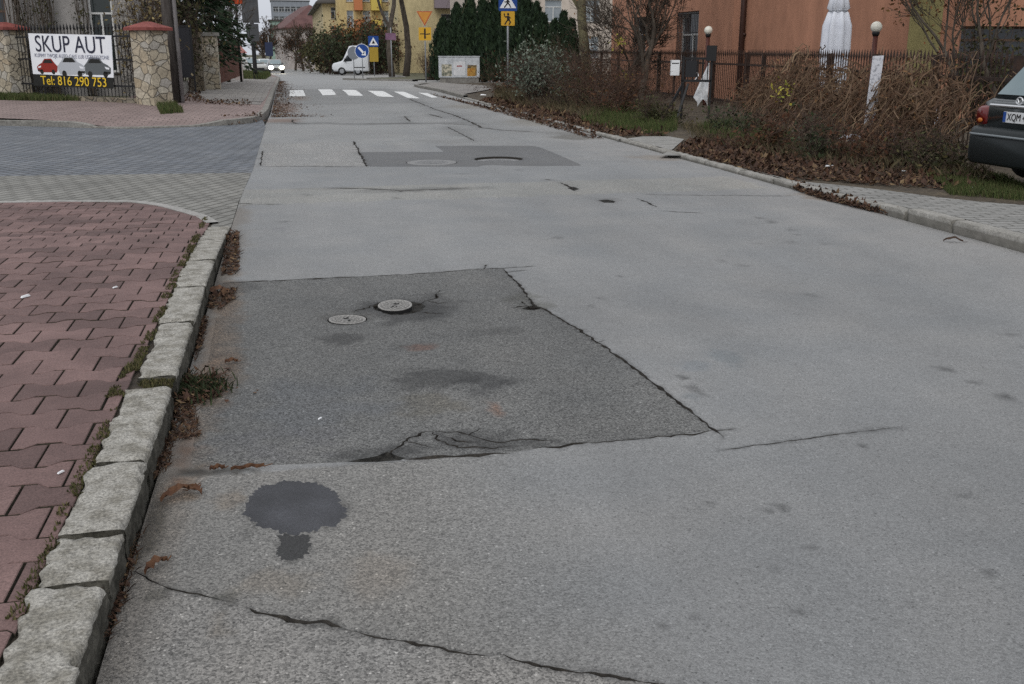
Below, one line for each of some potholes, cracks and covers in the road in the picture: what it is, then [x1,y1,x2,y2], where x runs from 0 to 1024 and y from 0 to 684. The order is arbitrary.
manhole cover [329,315,366,325]
crack [135,571,658,684]
manhole cover [378,300,412,315]
crack [224,265,895,460]
